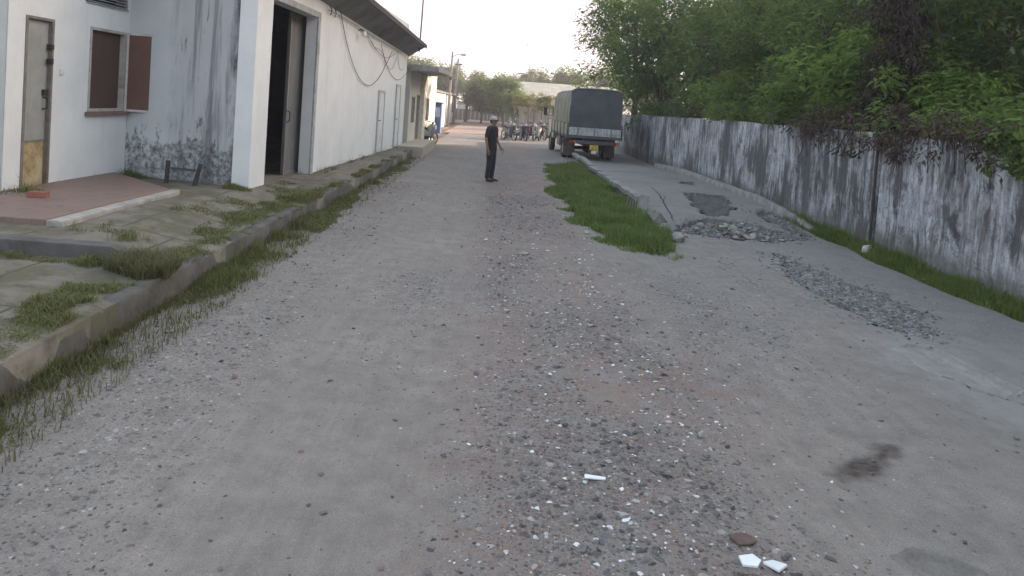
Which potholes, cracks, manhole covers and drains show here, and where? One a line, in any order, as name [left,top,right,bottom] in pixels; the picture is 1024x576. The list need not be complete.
pothole [674,219,802,243]
crack [618,171,695,220]
pothole [771,253,936,340]
pothole [756,209,809,236]
pothole [681,192,737,217]
